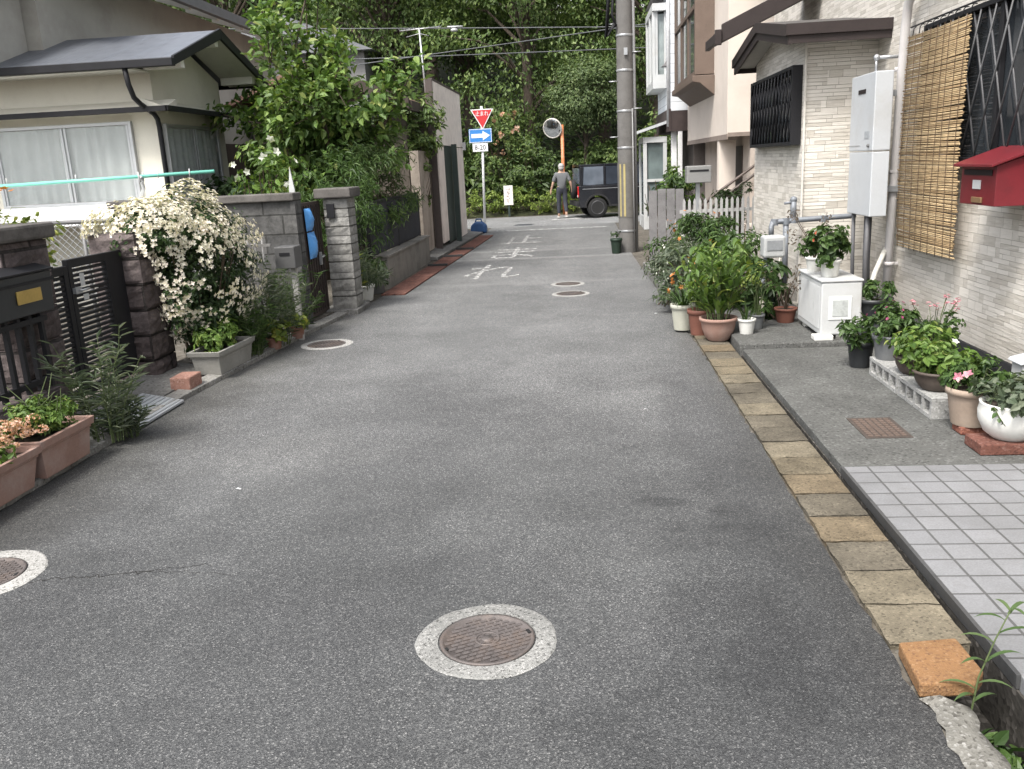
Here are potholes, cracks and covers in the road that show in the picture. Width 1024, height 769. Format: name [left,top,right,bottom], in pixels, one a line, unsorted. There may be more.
manhole cover [301,339,353,350]
manhole cover [414,604,557,680]
crack [30,563,227,583]
manhole cover [0,550,48,594]
